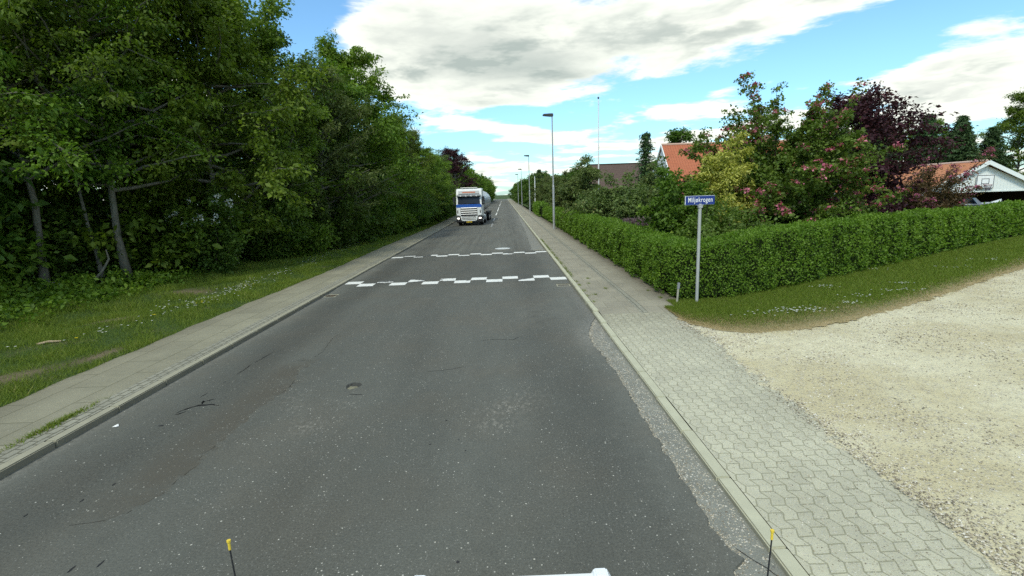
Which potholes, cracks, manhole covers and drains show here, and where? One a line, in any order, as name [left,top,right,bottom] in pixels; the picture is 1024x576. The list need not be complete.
crack [176,352,273,415]
